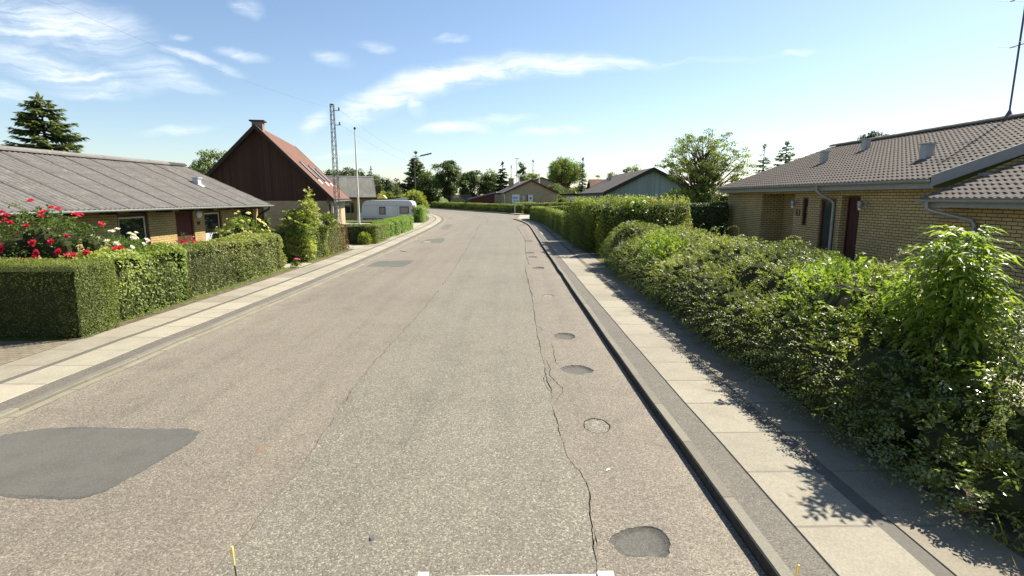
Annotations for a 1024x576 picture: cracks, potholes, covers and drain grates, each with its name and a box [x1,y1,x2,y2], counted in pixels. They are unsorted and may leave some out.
manhole cover [583,418,610,433]
crack [522,235,597,571]
